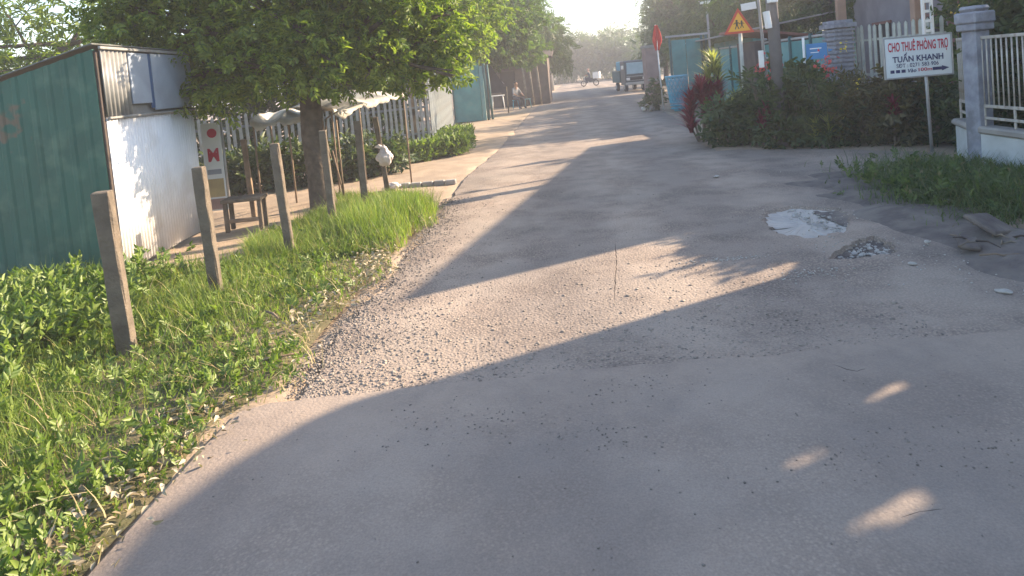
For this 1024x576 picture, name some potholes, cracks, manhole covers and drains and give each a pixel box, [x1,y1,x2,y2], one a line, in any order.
pothole [828,236,896,259]
pothole [760,206,851,238]
